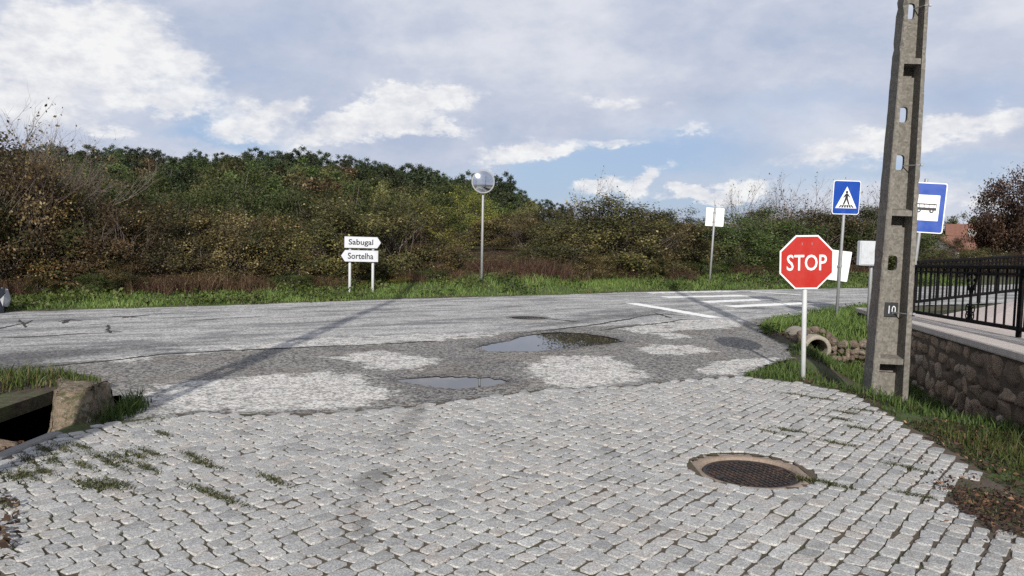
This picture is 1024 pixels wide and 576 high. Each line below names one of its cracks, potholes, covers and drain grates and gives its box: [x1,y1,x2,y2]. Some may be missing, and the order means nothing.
manhole cover [692,454,814,490]
crack [0,315,144,338]
pothole [458,330,639,354]
pothole [372,373,530,393]
